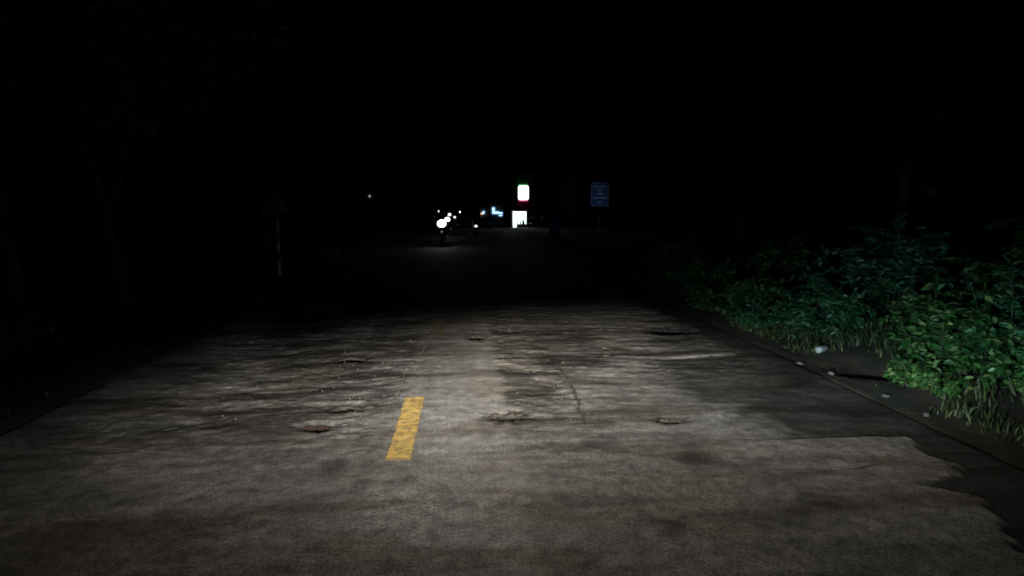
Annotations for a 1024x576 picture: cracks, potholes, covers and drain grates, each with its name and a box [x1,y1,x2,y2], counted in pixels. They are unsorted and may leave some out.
pothole [487,414,530,422]
crack [503,345,726,427]
crack [395,325,437,405]
pothole [302,425,332,433]
